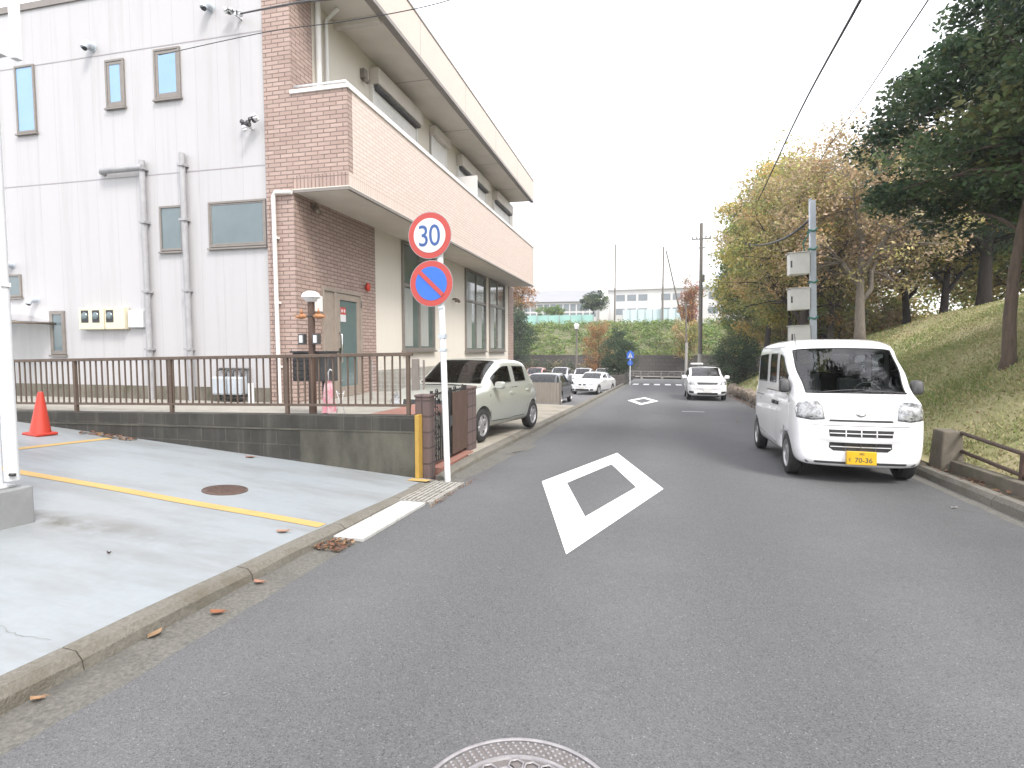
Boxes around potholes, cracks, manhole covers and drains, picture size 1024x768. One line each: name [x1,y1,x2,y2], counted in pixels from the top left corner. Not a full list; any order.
manhole cover [433,737,600,768]
manhole cover [201,485,248,496]
drain grate [399,480,464,505]
